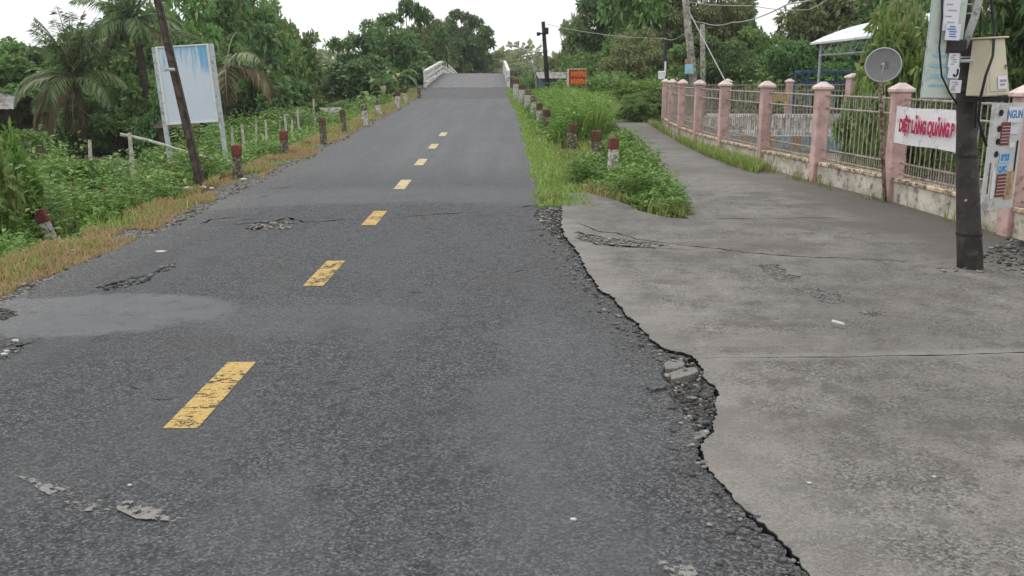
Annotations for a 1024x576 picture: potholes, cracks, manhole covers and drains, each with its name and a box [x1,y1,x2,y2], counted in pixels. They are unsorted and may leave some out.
pothole [754,263,802,283]
crack [531,207,915,576]
pothole [794,287,848,304]
pothole [244,220,300,231]
crack [200,217,344,230]
pothole [573,231,667,249]
pothole [661,357,716,436]
pothole [0,308,19,321]
pothole [95,260,180,291]
